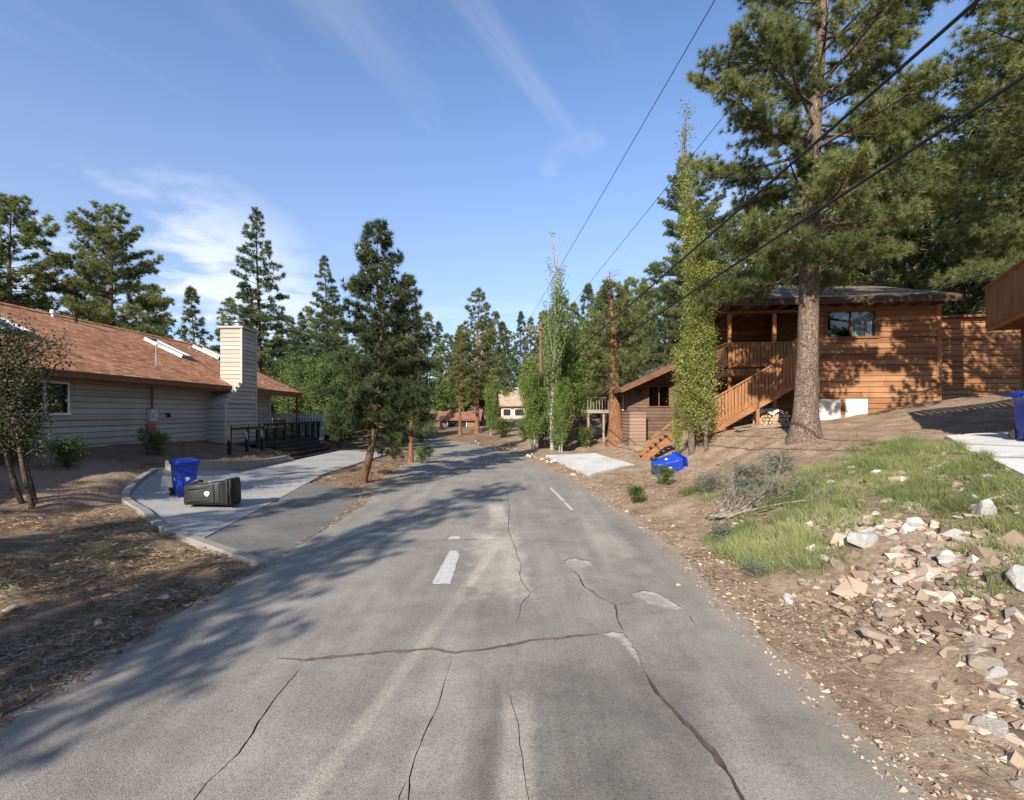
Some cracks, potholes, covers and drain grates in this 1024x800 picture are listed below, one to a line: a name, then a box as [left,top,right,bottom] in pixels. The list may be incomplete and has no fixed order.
crack [193,572,695,800]
crack [388,493,584,620]
